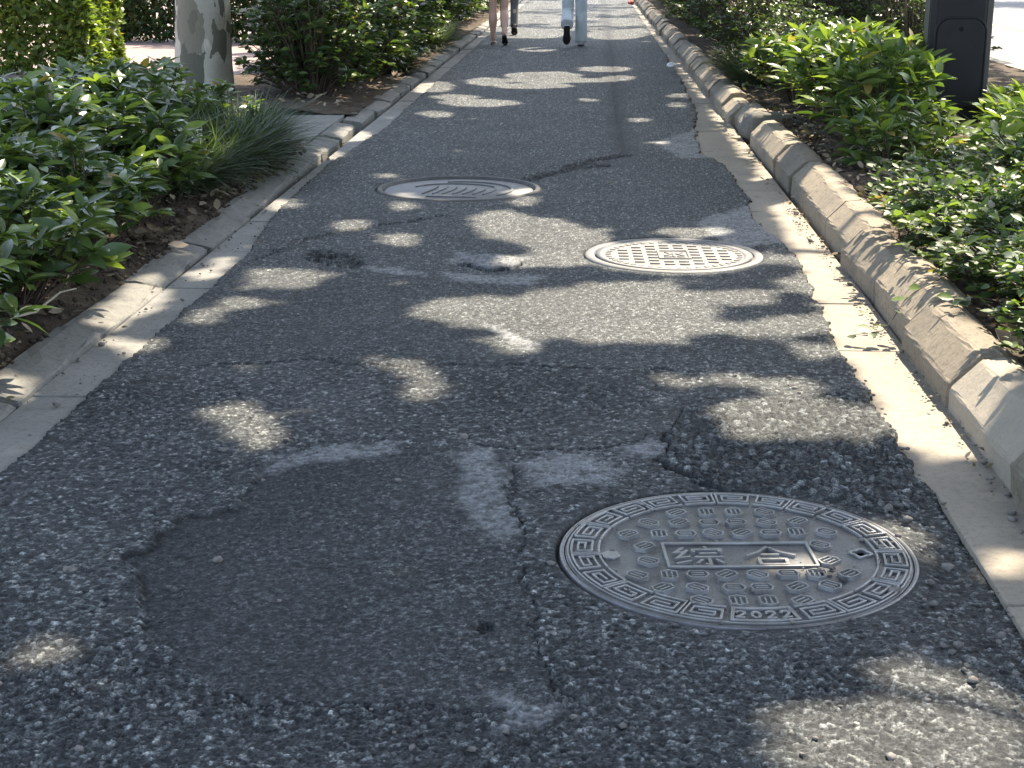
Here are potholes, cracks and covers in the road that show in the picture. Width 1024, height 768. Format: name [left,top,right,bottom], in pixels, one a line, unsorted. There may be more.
manhole cover [585,238,763,274]
manhole cover [559,492,919,630]
manhole cover [377,176,540,202]
pothole [299,249,374,271]
pothole [456,262,523,273]
crack [473,407,720,707]
crack [516,31,633,182]
